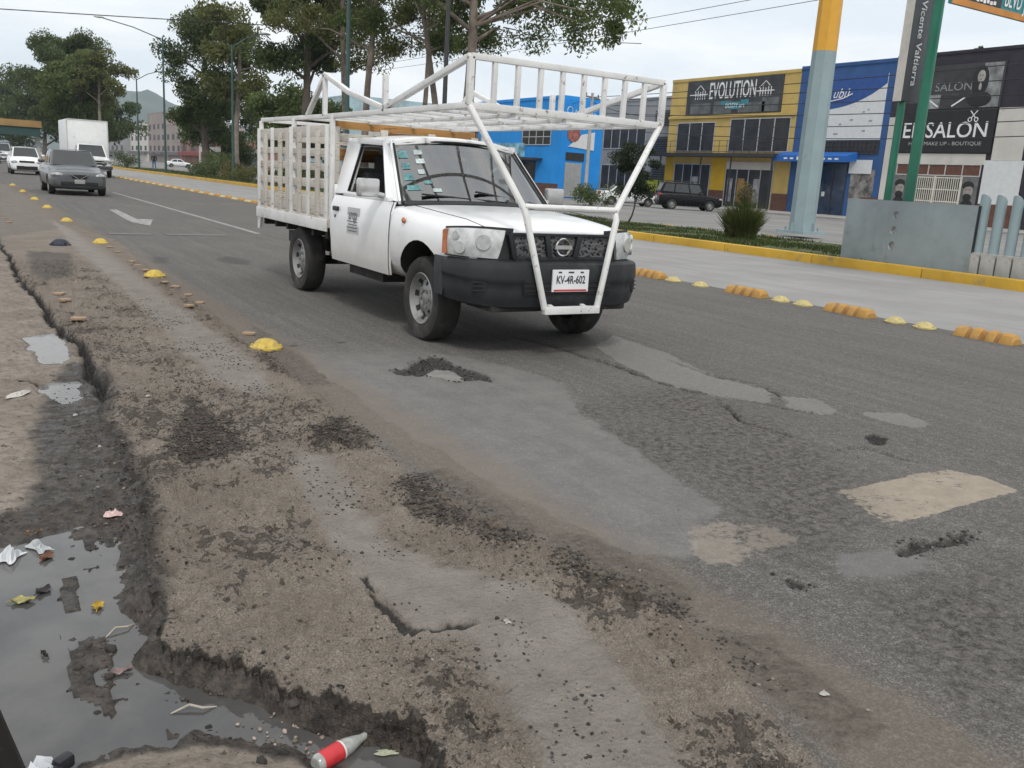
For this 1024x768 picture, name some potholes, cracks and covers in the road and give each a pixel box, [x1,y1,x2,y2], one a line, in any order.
crack [509,336,832,438]
pothole [388,354,495,383]
crack [0,243,115,404]
pothole [861,433,890,446]
crack [357,573,482,637]
pothole [890,530,981,558]
pothole [0,401,452,768]
